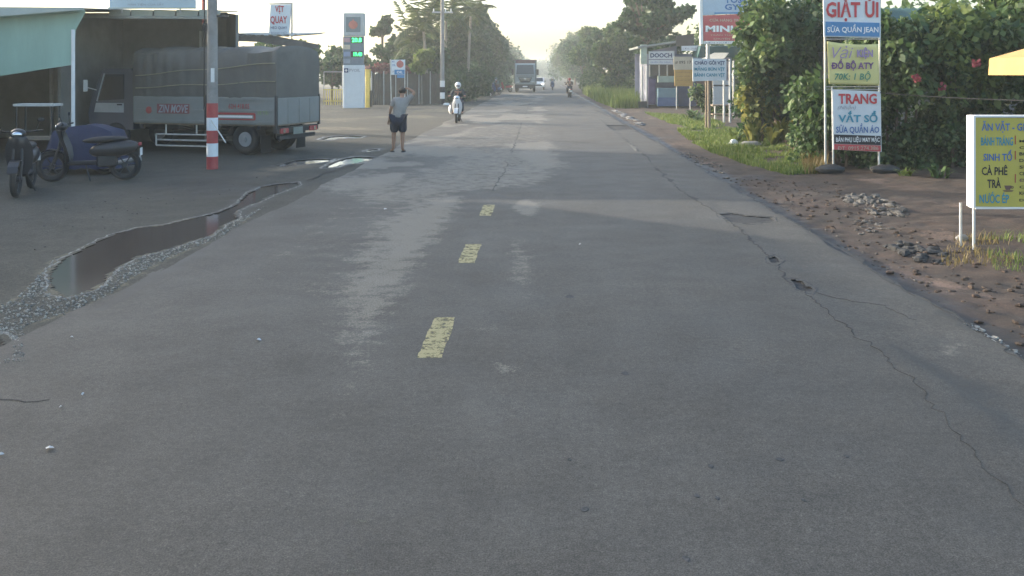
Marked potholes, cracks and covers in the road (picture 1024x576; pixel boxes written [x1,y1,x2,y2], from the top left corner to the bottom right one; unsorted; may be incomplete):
pothole [319,156,372,169]
pothole [715,212,778,225]
crack [492,104,530,191]
pothole [786,278,817,295]
pothole [0,181,302,333]
crack [594,109,1024,506]
pothole [271,158,337,168]
